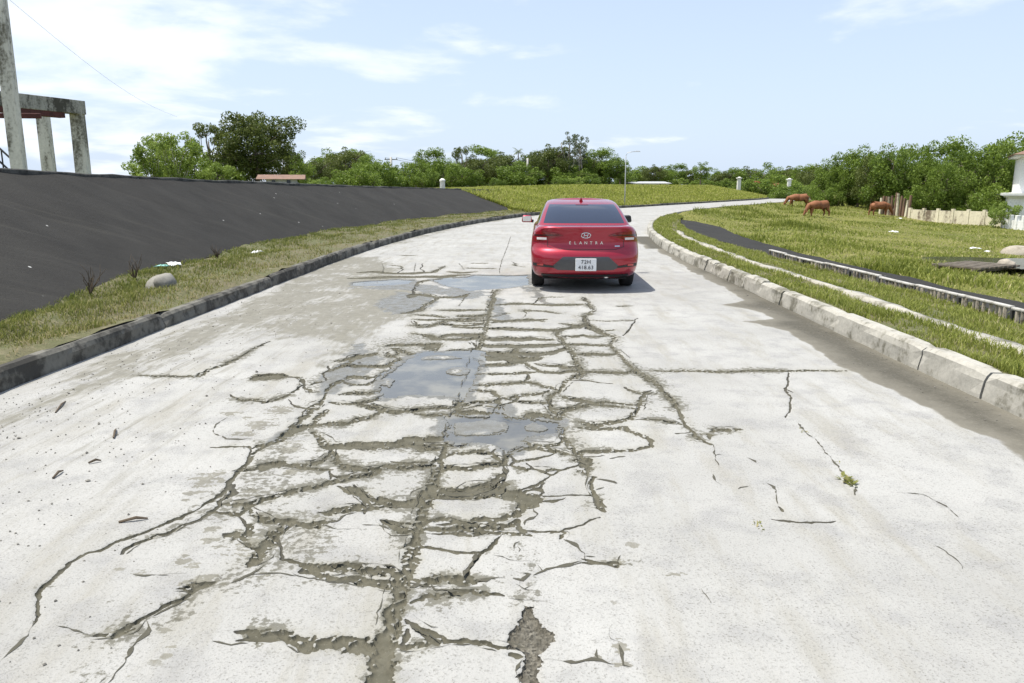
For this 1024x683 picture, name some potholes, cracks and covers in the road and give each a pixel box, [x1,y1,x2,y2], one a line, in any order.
pothole [506,605,556,683]
pothole [444,404,561,452]
crack [783,372,857,495]
crack [767,483,836,524]
crack [2,255,743,683]
